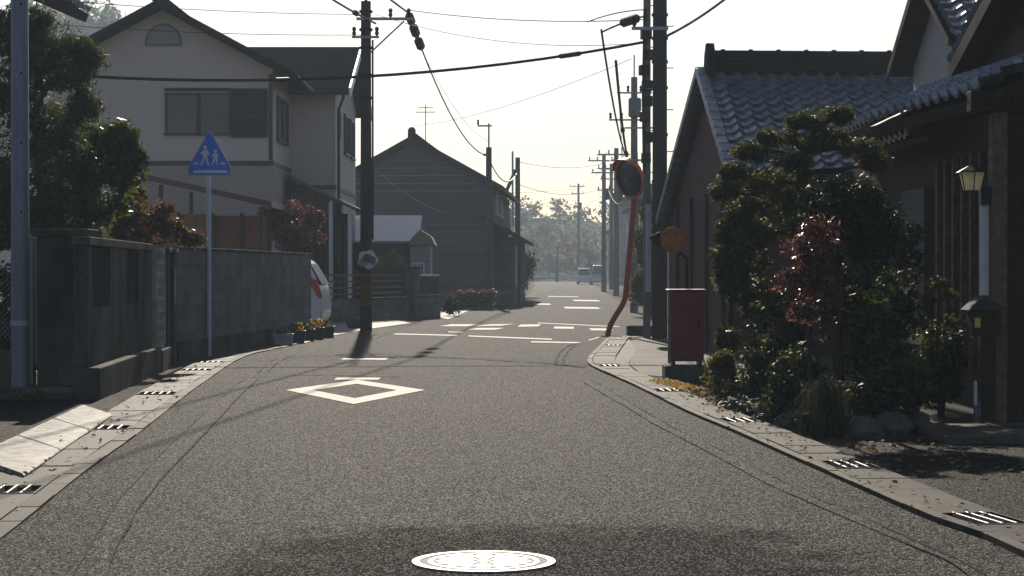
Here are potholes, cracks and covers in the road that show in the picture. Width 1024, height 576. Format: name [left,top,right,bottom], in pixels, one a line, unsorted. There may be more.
drain grate [939,511,1024,526]
manhole cover [412,550,556,574]
drain grate [817,460,883,469]
drain grate [0,485,46,494]
